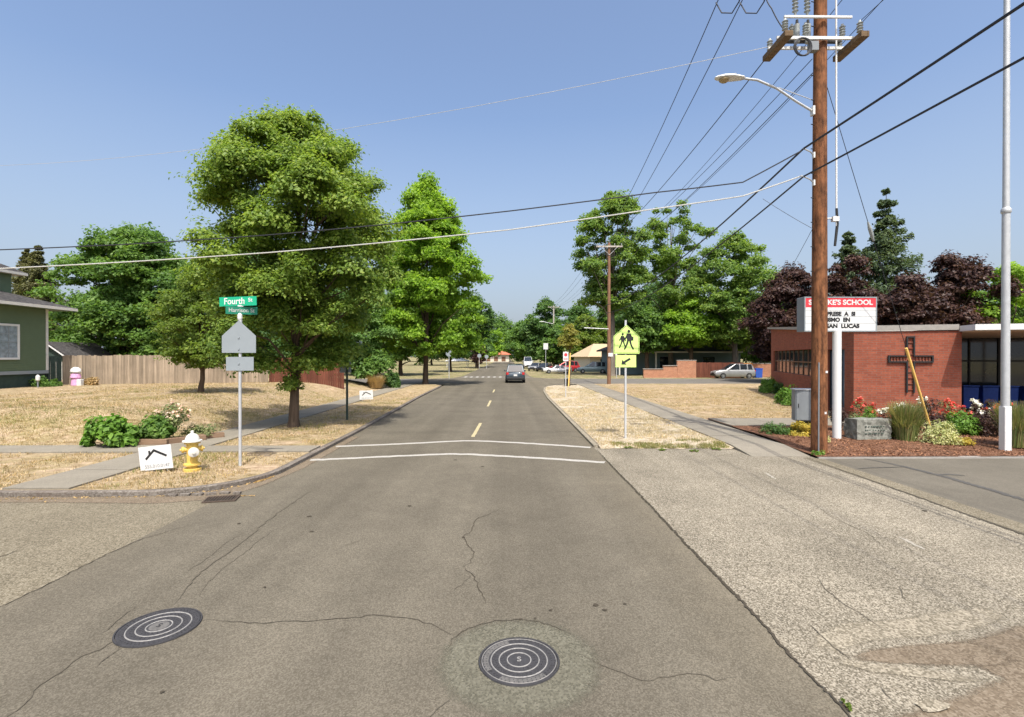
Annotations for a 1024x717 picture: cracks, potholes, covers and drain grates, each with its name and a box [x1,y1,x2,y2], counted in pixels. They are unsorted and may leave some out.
manhole cover [478,637,560,687]
manhole cover [112,607,203,648]
crack [453,511,495,602]
crack [6,609,132,717]
crack [449,619,574,647]
drain grate [201,494,241,503]
crack [174,488,315,604]
crack [209,614,453,635]
crack [582,654,738,681]
